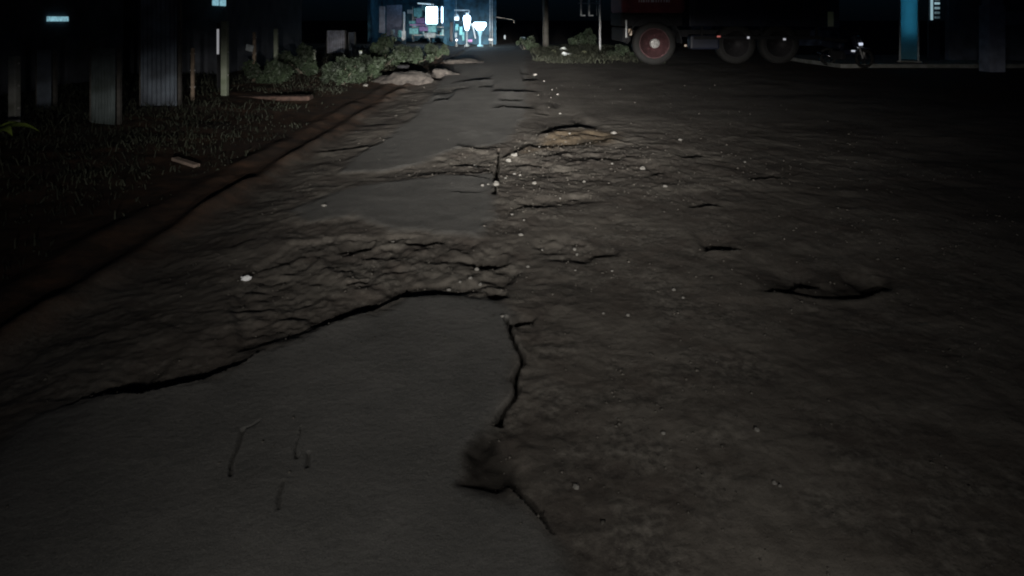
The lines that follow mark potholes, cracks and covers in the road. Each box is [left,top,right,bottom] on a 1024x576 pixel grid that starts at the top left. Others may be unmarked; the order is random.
crack [62,342,272,478]
crack [291,278,459,339]
pothole [504,129,619,159]
pothole [449,428,522,498]
crack [271,423,315,513]
pothole [752,271,900,302]
crack [406,72,644,193]
crack [503,478,556,536]
